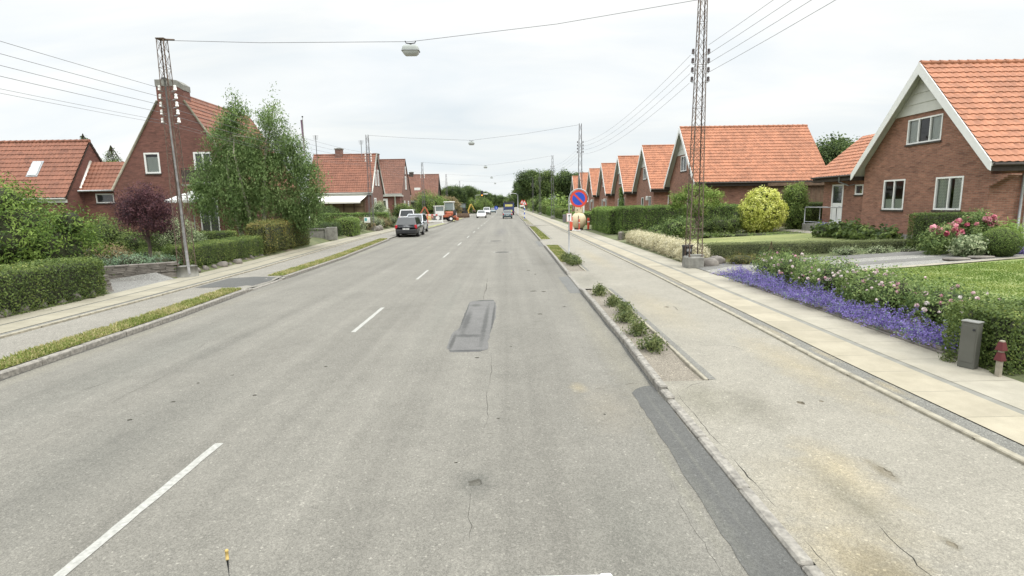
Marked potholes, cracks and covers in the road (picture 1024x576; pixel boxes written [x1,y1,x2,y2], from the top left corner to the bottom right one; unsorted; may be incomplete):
crack [876,522,930,575]
crack [681,382,832,571]
